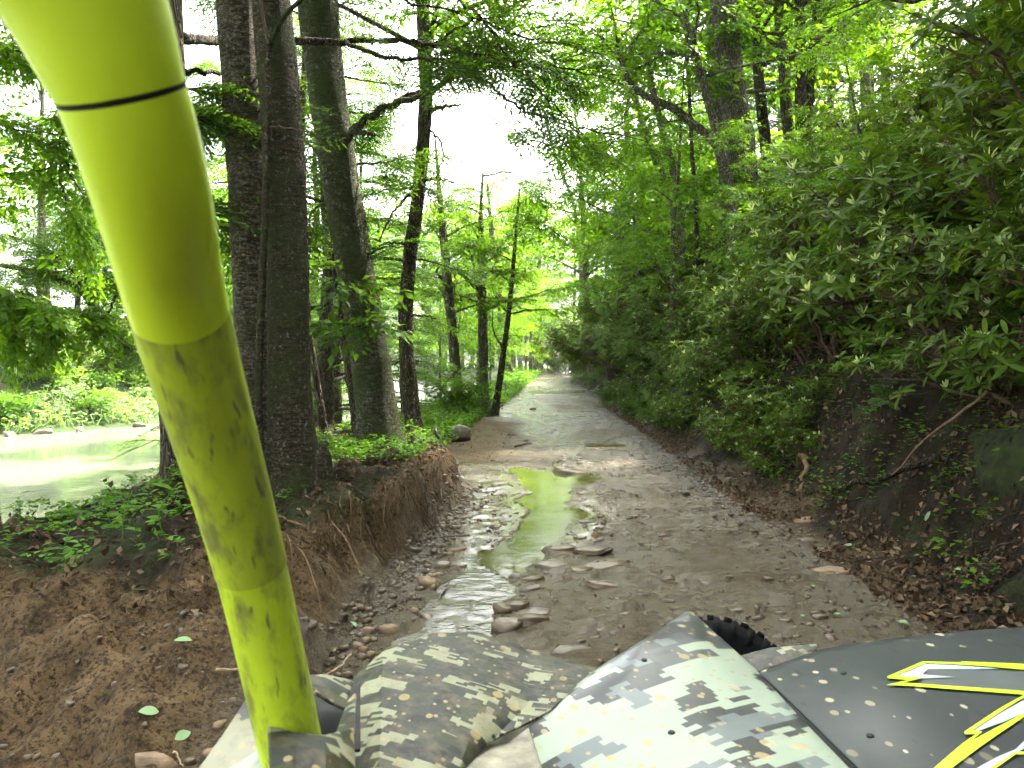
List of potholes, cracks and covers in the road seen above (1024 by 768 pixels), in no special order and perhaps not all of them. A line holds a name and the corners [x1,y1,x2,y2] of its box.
pothole [475,466,611,579]
